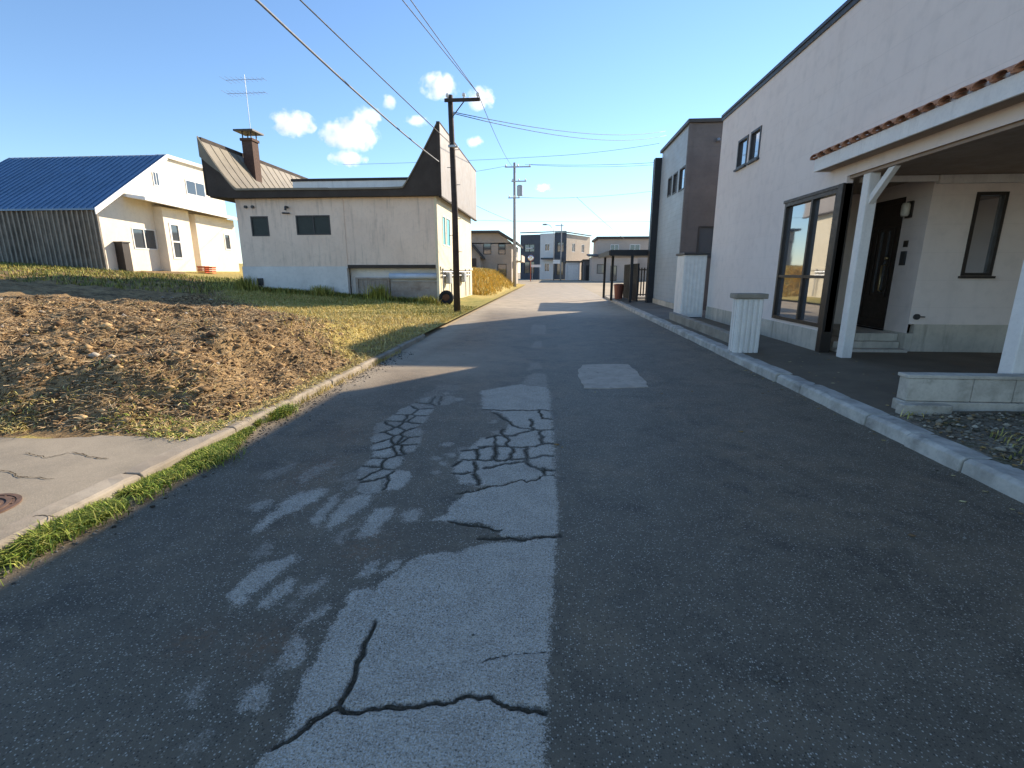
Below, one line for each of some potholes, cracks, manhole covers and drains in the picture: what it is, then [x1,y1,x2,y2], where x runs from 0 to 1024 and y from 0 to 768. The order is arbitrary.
crack [273,623,545,750]
crack [360,397,442,490]
crack [450,522,556,542]
crack [453,410,553,495]
manhole cover [0,493,23,514]
